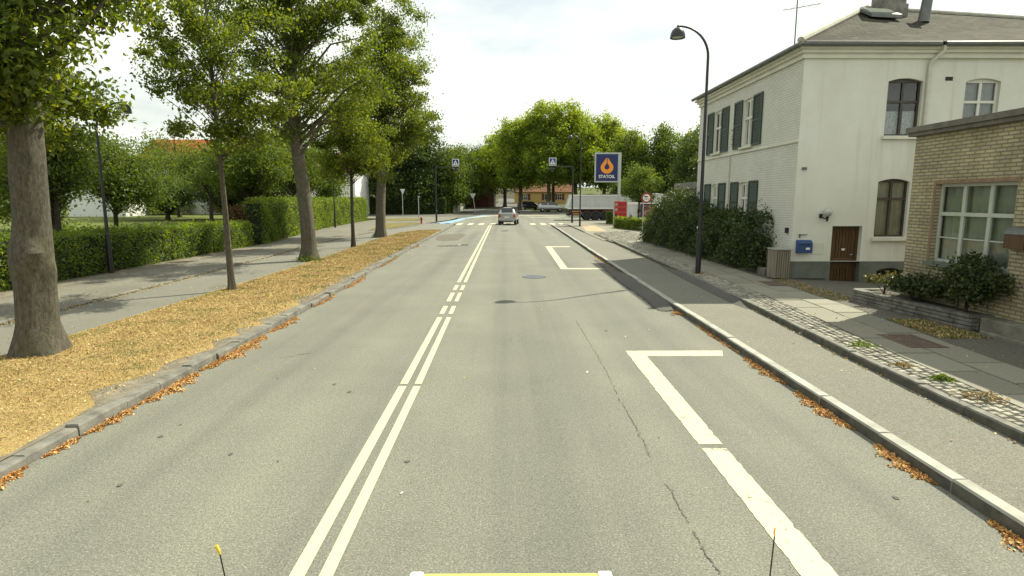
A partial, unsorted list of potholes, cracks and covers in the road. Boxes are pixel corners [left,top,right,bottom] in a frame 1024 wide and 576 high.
manhole cover [877,334,950,348]
crack [577,323,650,456]
crack [665,483,722,575]
